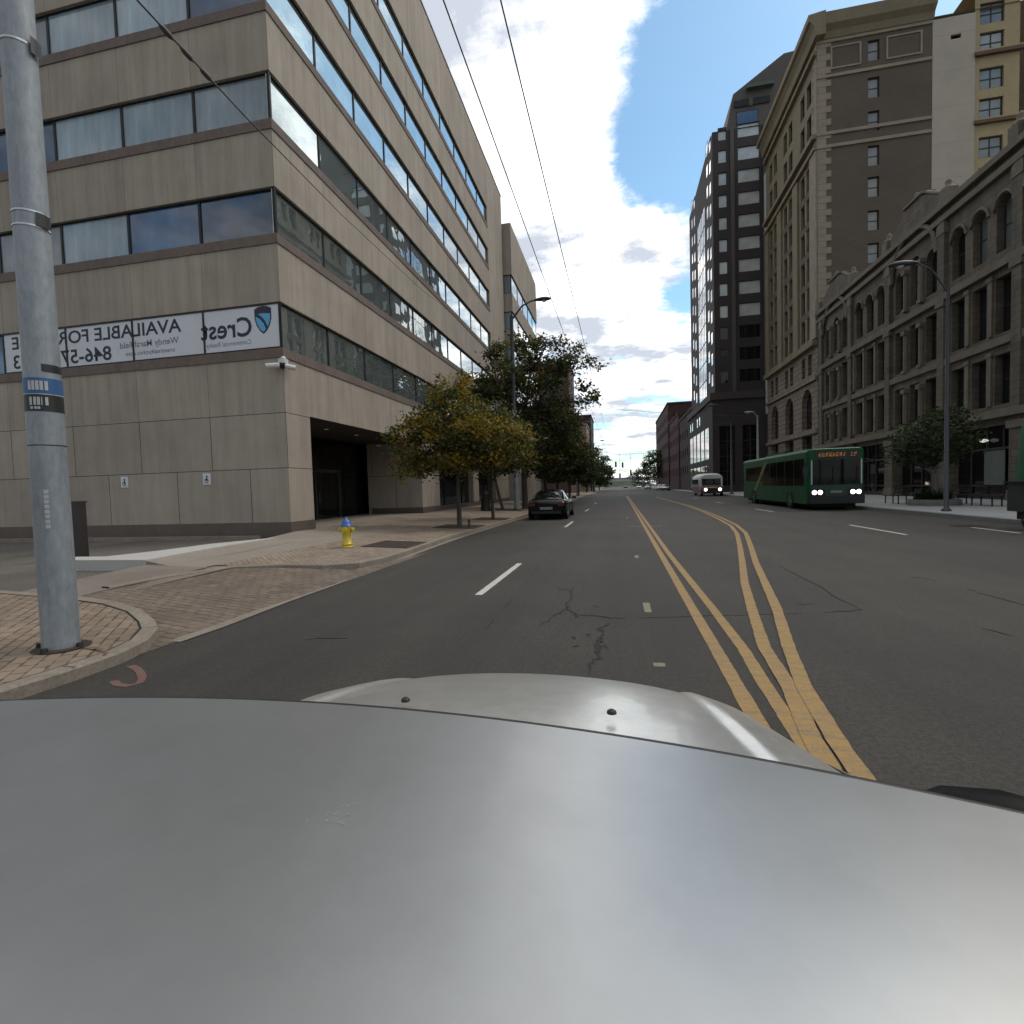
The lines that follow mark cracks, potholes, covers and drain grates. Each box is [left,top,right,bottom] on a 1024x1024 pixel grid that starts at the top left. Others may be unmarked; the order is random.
crack [782,567,861,613]
crack [541,586,622,673]
